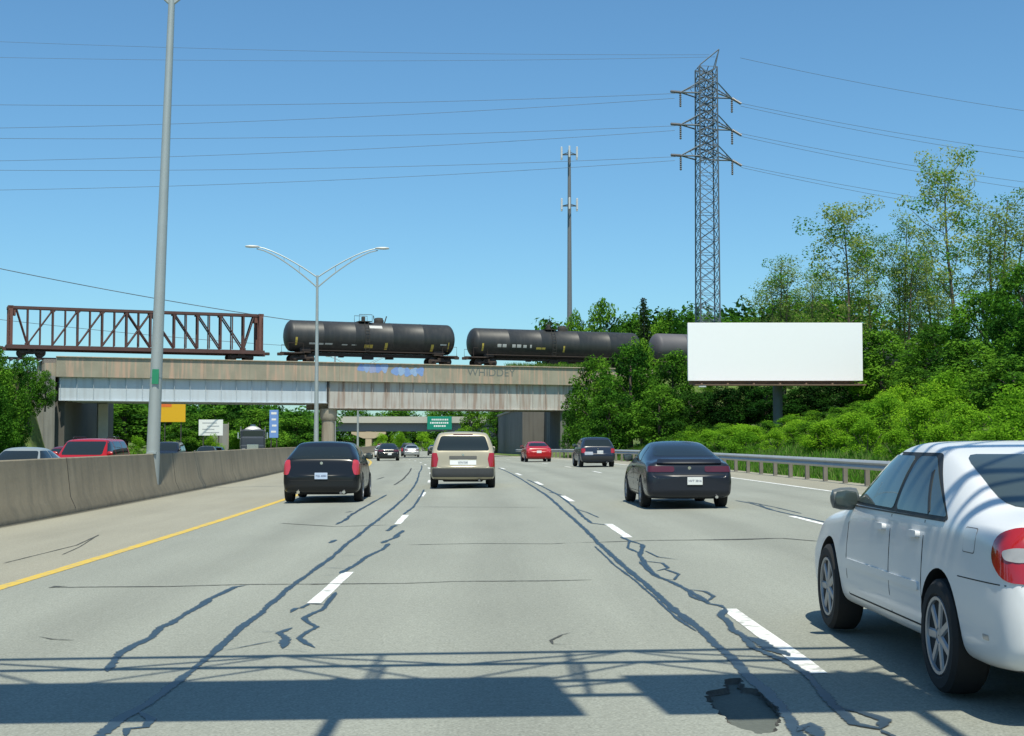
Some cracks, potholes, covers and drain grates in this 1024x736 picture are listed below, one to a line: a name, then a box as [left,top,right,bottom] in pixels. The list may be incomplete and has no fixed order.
crack [228,627,307,652]
crack [528,480,813,542]
crack [49,580,562,588]
pothole [704,678,781,734]
crack [5,535,98,563]
